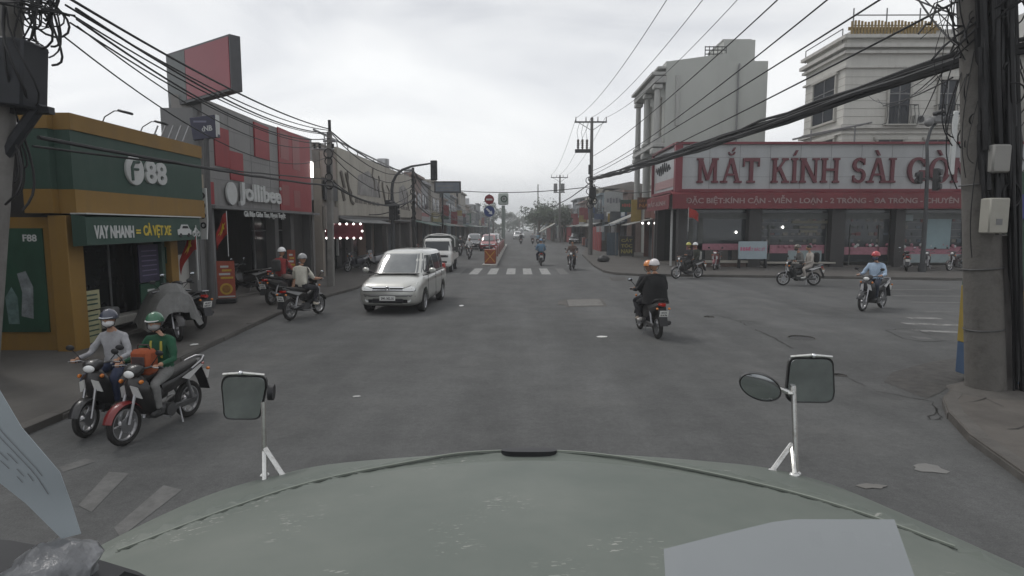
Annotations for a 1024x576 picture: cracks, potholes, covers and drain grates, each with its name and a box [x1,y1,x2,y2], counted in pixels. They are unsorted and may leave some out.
crack [853,380,943,420]
